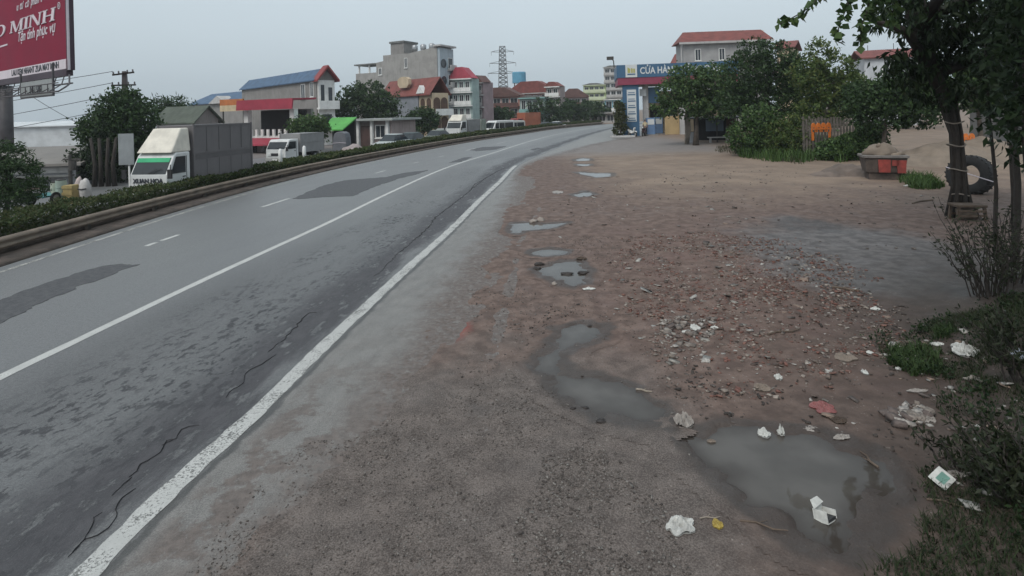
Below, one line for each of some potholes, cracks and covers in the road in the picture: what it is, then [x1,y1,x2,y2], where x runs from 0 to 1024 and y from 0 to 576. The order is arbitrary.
pothole [500,220,579,236]
crack [226,312,317,397]
pothole [564,190,606,198]
pothole [520,256,606,292]
pothole [519,246,581,259]
pothole [649,407,955,576]
pothole [513,316,699,444]
crack [68,425,197,557]
